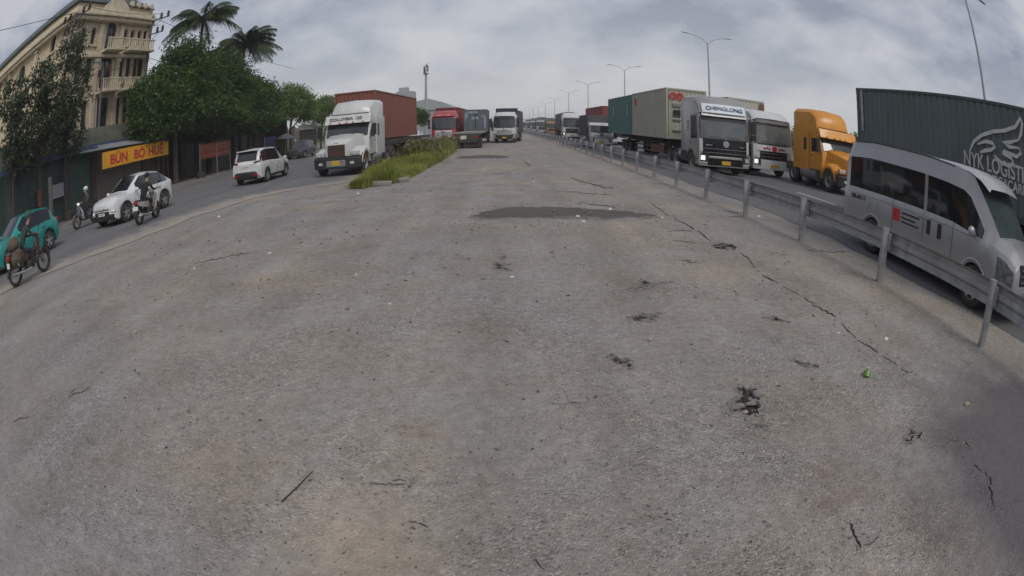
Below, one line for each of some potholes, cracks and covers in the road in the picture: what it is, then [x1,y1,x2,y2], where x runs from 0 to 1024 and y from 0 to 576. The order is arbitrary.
crack [550,177,616,208]
pothole [630,313,661,323]
pothole [724,386,763,417]
crack [849,523,880,549]
pothole [902,428,925,446]
crack [190,252,250,264]
pothole [609,356,634,368]
crack [942,439,995,511]
